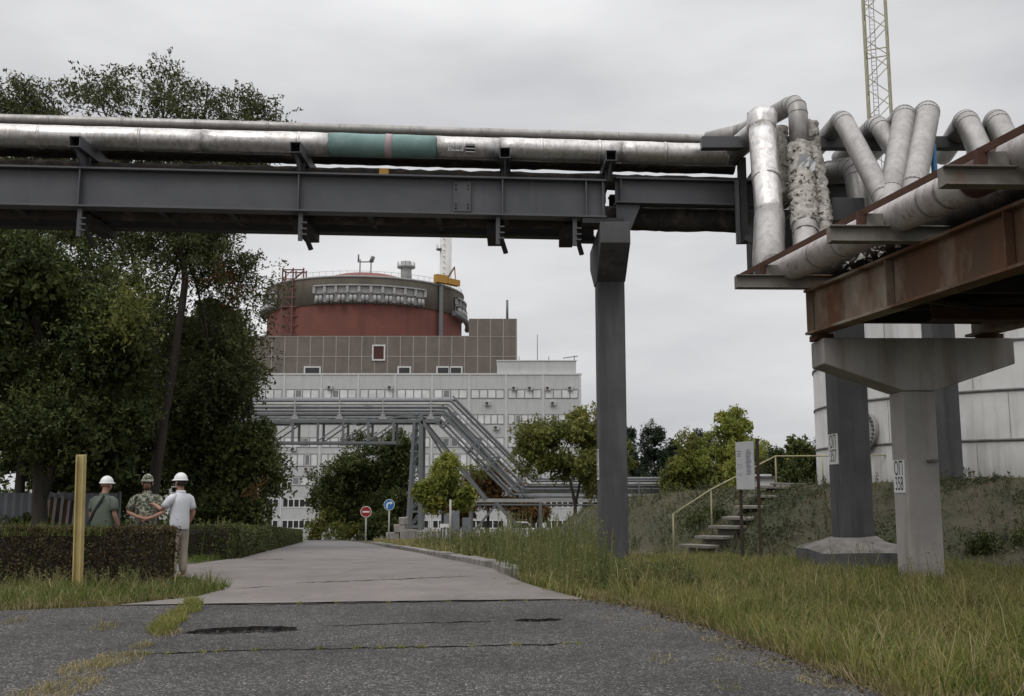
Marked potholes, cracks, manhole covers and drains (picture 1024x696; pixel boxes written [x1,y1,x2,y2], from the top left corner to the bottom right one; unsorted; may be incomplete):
crack [130,643,585,655]
pothole [183,626,298,634]
